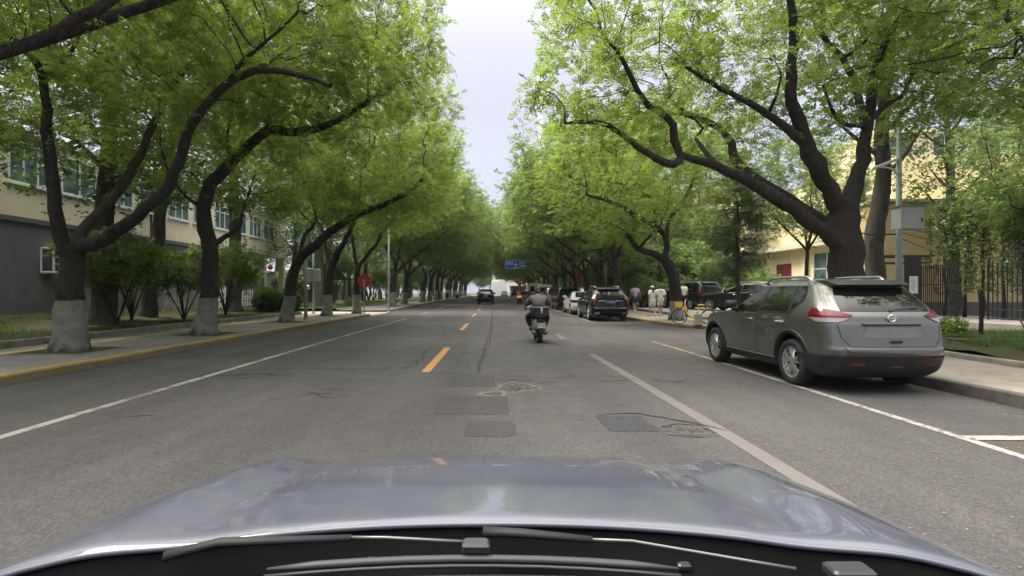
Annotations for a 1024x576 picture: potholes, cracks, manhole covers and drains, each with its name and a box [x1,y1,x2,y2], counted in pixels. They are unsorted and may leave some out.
pothole [654,421,719,436]
pothole [494,382,543,393]
